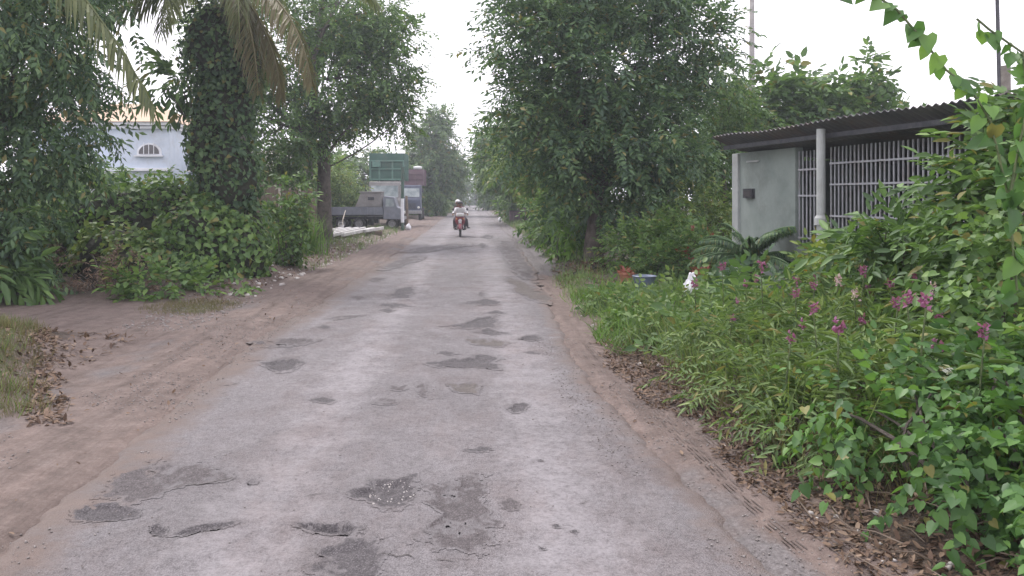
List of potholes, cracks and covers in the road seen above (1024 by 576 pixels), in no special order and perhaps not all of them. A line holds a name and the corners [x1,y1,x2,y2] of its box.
pothole [498,497,522,511]
pothole [472,327,511,335]
pothole [423,354,506,371]
pothole [345,472,427,512]
pothole [67,500,143,523]
pothole [506,401,532,414]
pothole [88,457,237,506]
pothole [309,396,338,404]
pothole [258,356,307,374]
pothole [290,520,366,536]
pothole [439,314,504,330]
pothole [406,471,505,558]
